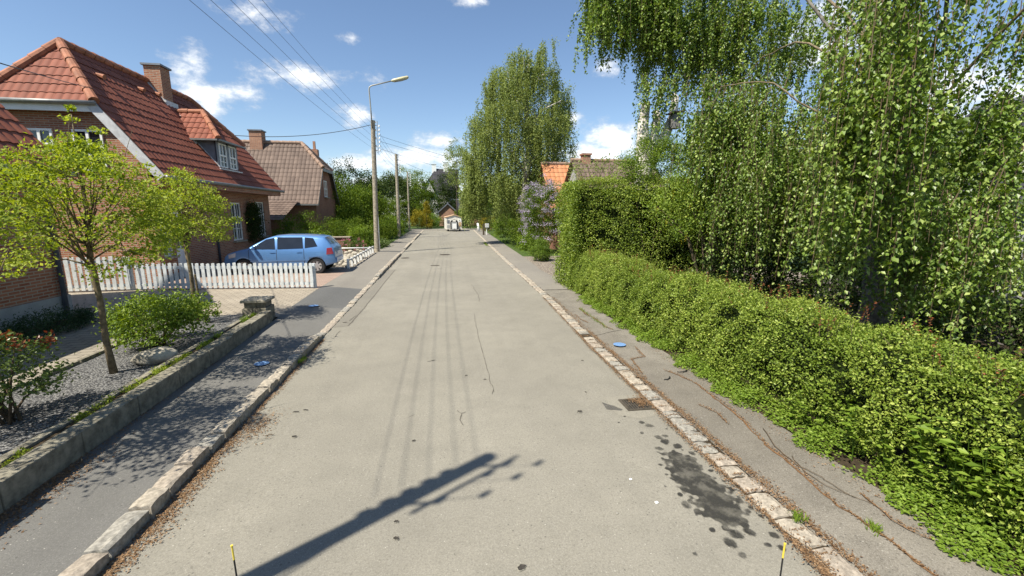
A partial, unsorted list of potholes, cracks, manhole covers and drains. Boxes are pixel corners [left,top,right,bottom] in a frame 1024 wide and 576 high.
crack [452,286,494,394]
drain grate [618,398,653,411]
